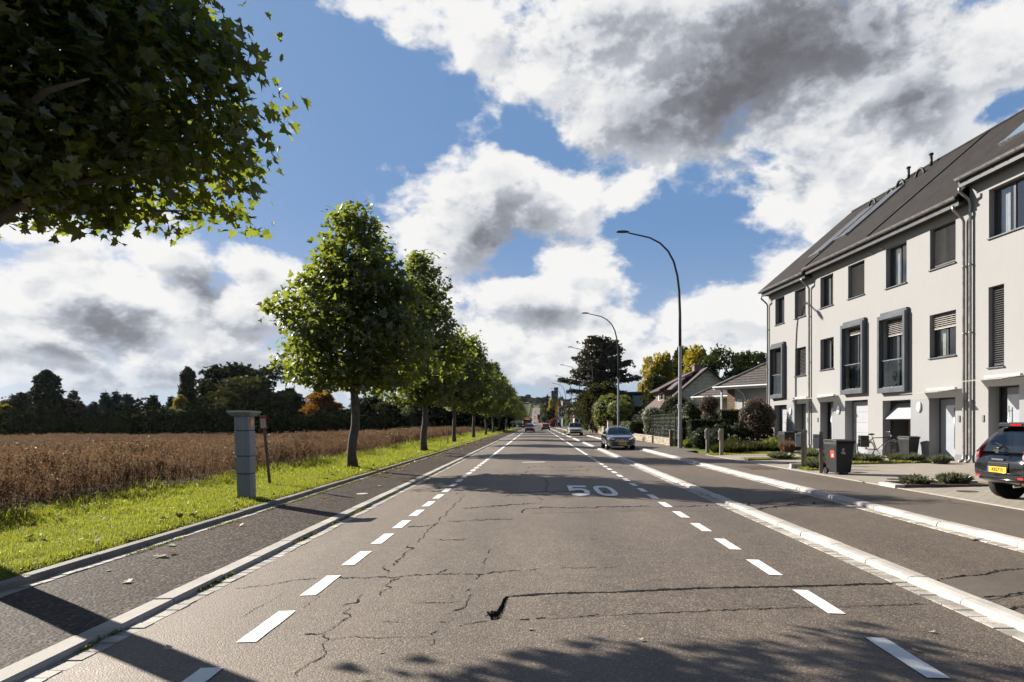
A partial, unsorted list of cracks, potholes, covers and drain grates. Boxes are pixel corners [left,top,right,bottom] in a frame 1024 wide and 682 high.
pothole [486,596,509,620]
